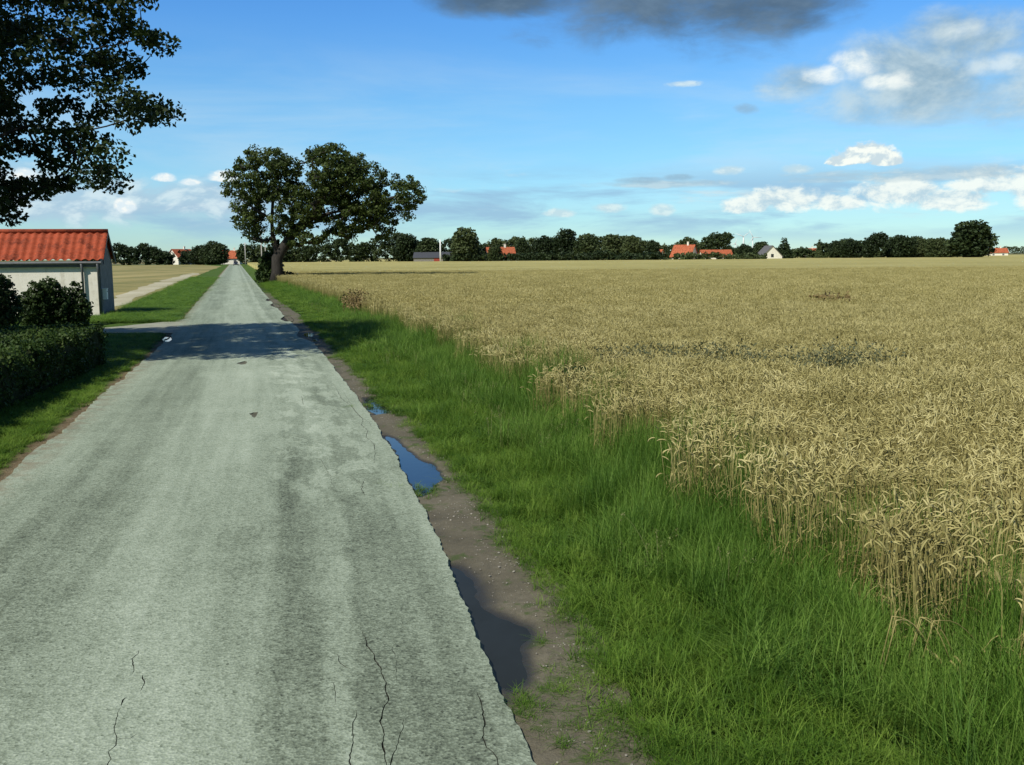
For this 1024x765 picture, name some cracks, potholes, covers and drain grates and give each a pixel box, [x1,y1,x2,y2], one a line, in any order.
crack [360,627,404,765]
crack [107,651,145,765]
crack [475,689,499,765]
crack [333,656,357,765]
